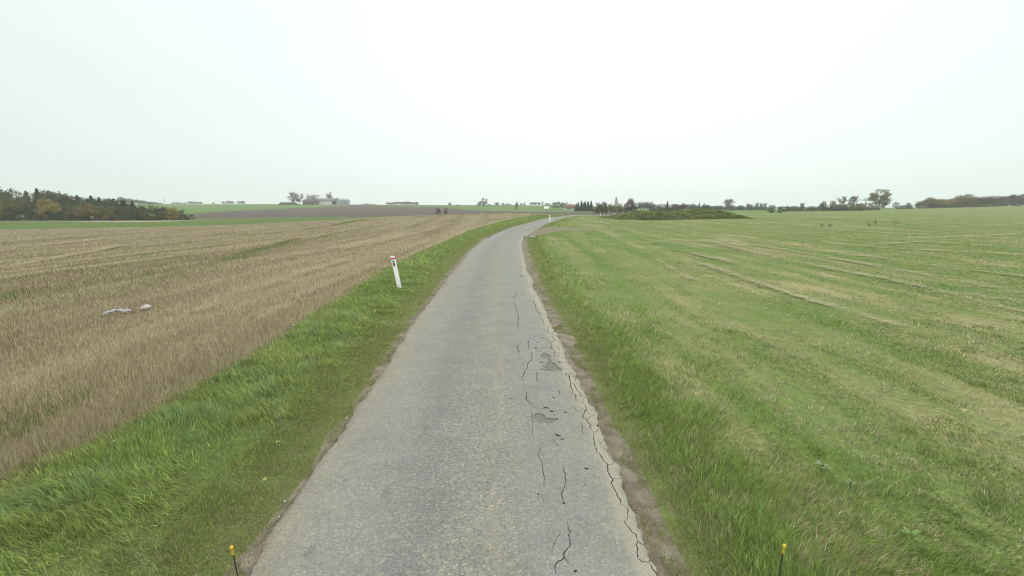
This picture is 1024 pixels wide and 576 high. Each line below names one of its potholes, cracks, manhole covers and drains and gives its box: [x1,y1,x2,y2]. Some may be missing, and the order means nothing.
pothole [541,353,562,371]
crack [514,285,658,576]
pothole [534,413,558,424]
